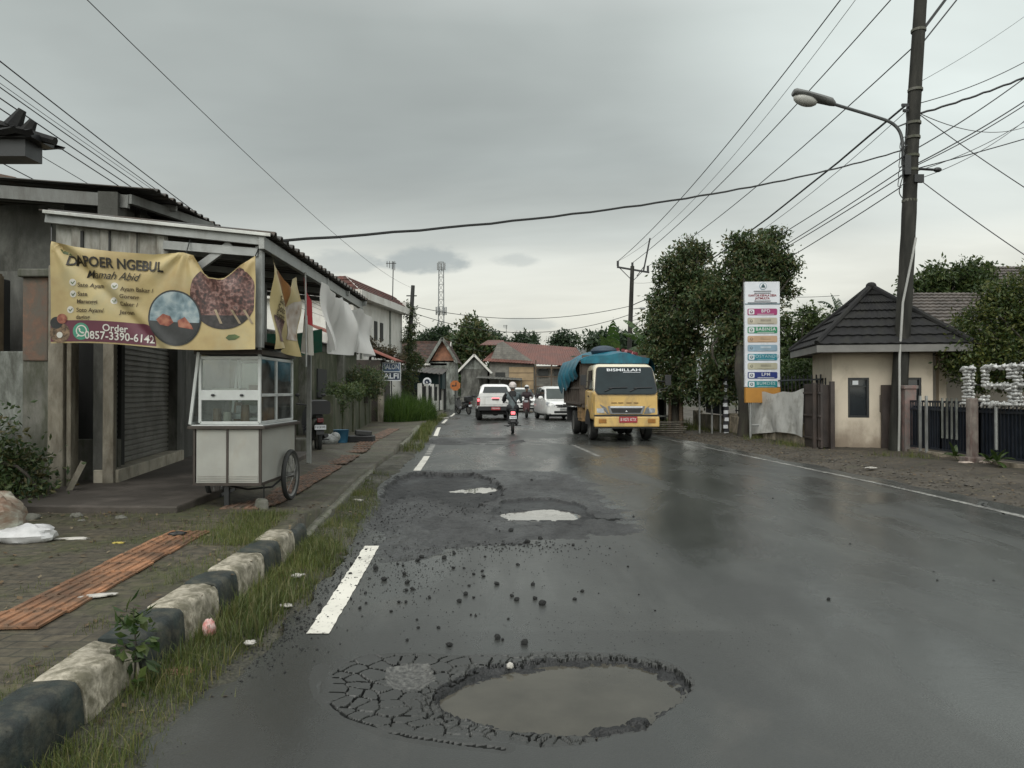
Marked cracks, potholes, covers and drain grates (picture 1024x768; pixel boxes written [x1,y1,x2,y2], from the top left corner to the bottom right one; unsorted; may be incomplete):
pothole [434,657,691,741]
crack [309,651,696,754]
pothole [491,497,596,529]
pothole [378,471,506,508]
